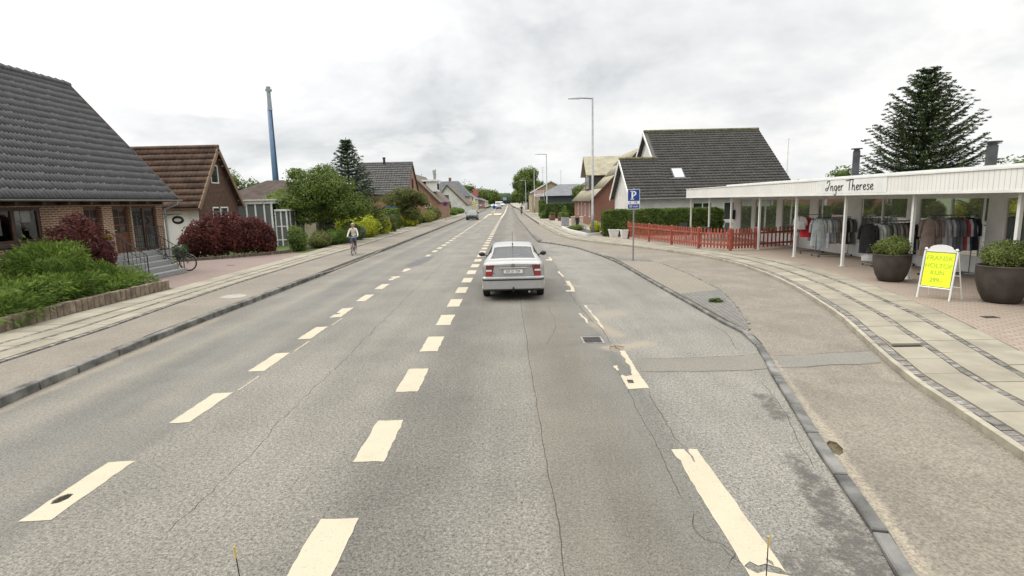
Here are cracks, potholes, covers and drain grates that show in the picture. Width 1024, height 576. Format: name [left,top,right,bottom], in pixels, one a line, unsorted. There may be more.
crack [692,511,747,568]
crack [618,371,684,501]
drain grate [580,336,605,344]
crack [519,291,565,576]
